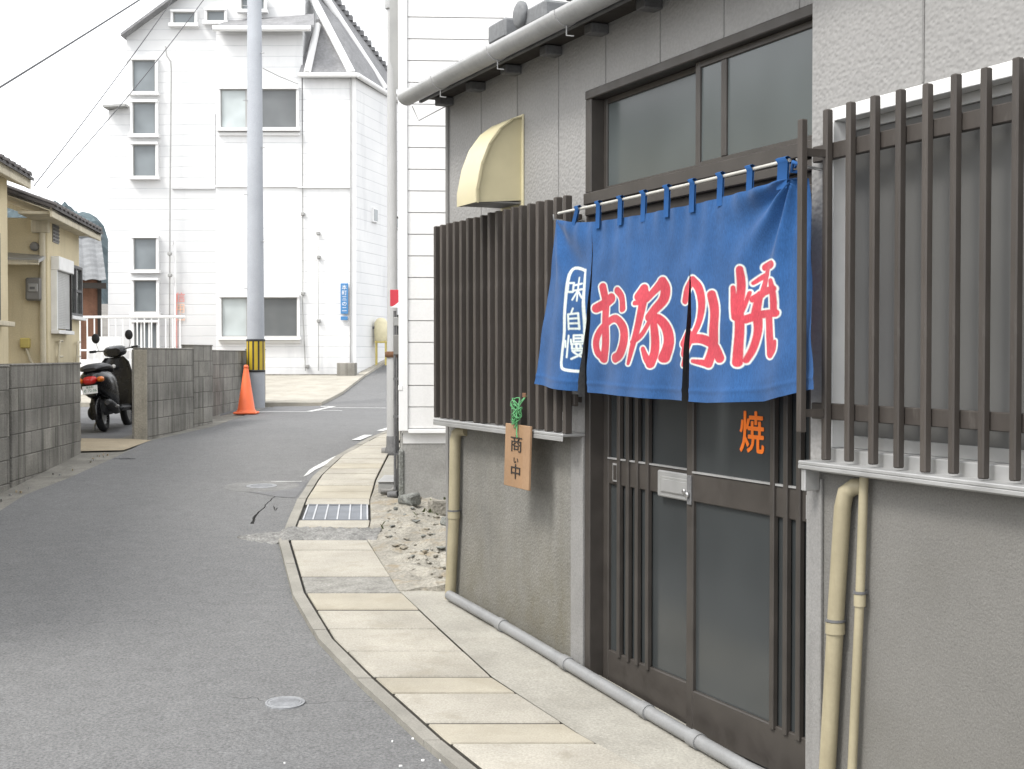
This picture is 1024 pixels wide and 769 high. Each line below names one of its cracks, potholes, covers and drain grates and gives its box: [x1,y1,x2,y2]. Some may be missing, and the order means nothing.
crack [250,496,277,524]
manhole cover [265,696,305,710]
drain grate [302,504,368,520]
